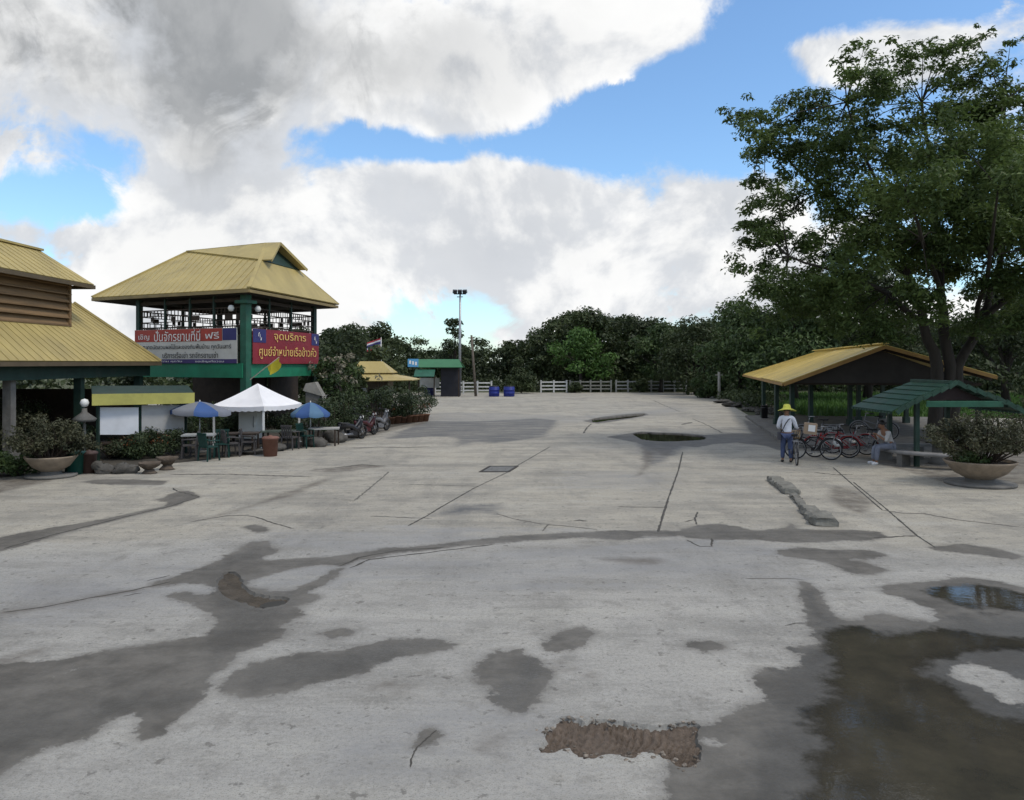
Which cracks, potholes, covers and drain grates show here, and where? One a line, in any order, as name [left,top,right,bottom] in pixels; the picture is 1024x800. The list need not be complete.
pothole [585,414,650,423]
crack [685,512,714,547]
pothole [209,570,297,611]
crack [410,730,436,767]
pothole [626,432,714,442]
crack [340,544,492,568]
pothole [526,711,714,774]
crack [7,575,171,612]
